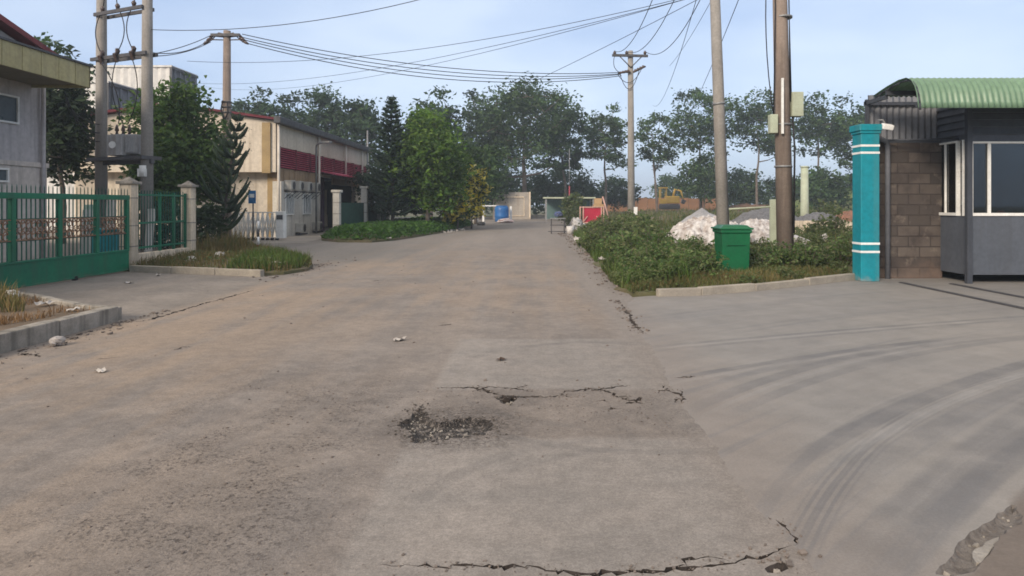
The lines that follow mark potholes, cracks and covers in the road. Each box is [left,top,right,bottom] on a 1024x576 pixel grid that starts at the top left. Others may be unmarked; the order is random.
crack [441,385,642,410]
pothole [395,406,494,443]
pothole [936,505,1023,576]
crack [382,520,798,576]
crack [622,306,646,334]
